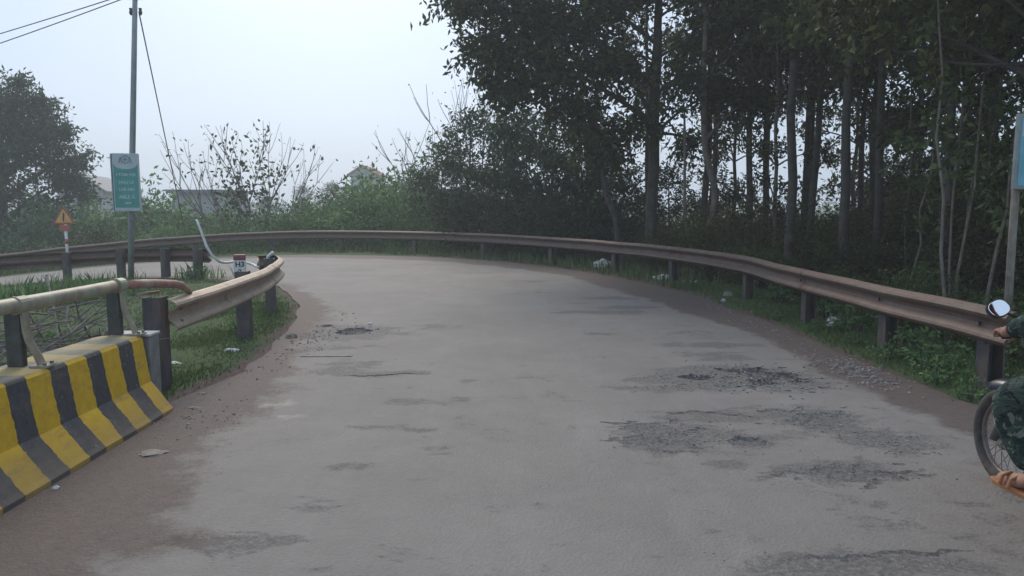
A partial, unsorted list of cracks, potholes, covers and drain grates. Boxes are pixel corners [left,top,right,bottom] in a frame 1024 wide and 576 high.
pothole [714,364,827,393]
